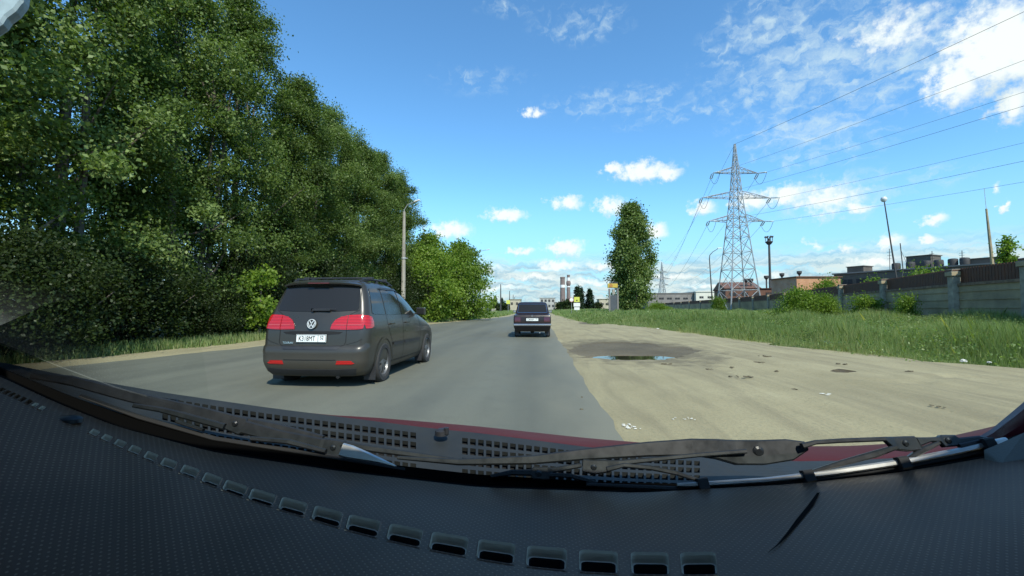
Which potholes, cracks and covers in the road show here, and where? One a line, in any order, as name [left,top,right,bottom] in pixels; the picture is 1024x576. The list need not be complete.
pothole [568,342,700,359]
